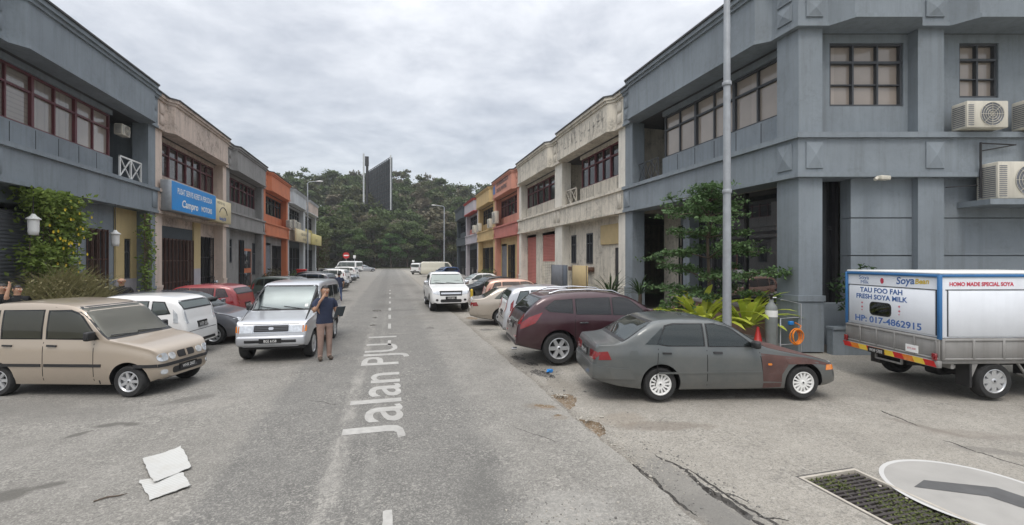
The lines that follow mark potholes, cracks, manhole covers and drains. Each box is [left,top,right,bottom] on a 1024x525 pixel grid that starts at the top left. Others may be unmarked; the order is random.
crack [943,440,1023,466]
drain grate [795,467,980,525]
crack [630,455,790,525]
pothole [579,419,606,437]
pothole [551,394,577,410]
